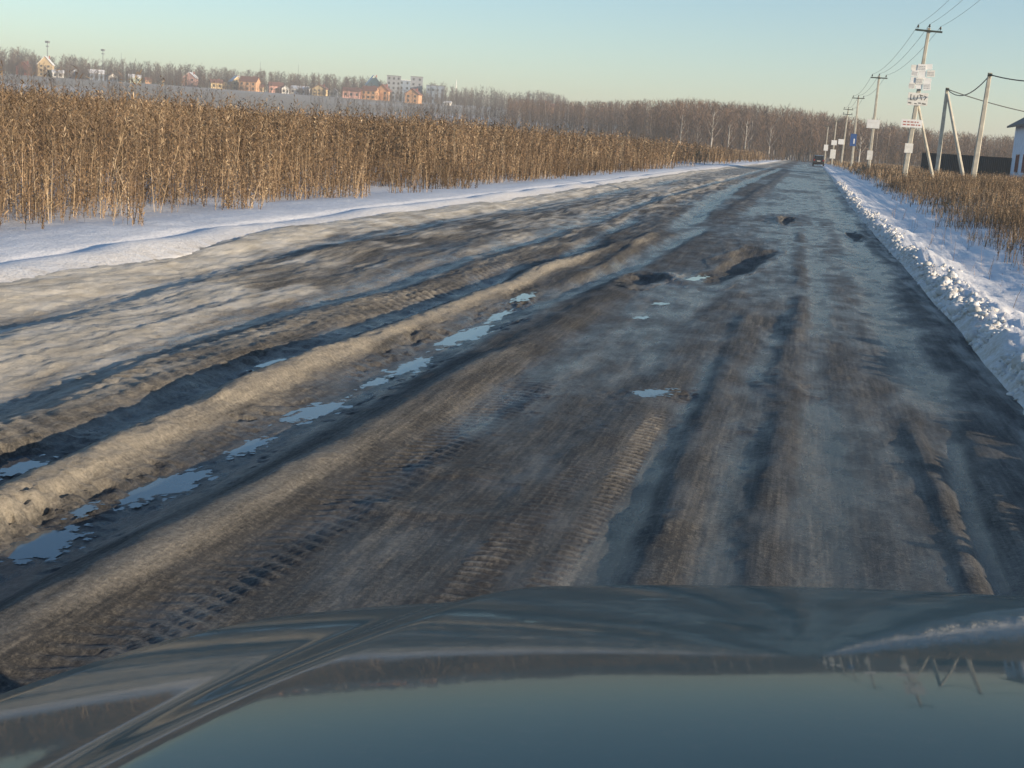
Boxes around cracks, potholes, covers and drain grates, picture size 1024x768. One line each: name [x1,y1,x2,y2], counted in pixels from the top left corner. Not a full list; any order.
pothole [844,230,868,242]
pothole [680,240,788,291]
pothole [773,214,797,226]
pothole [610,271,677,291]
